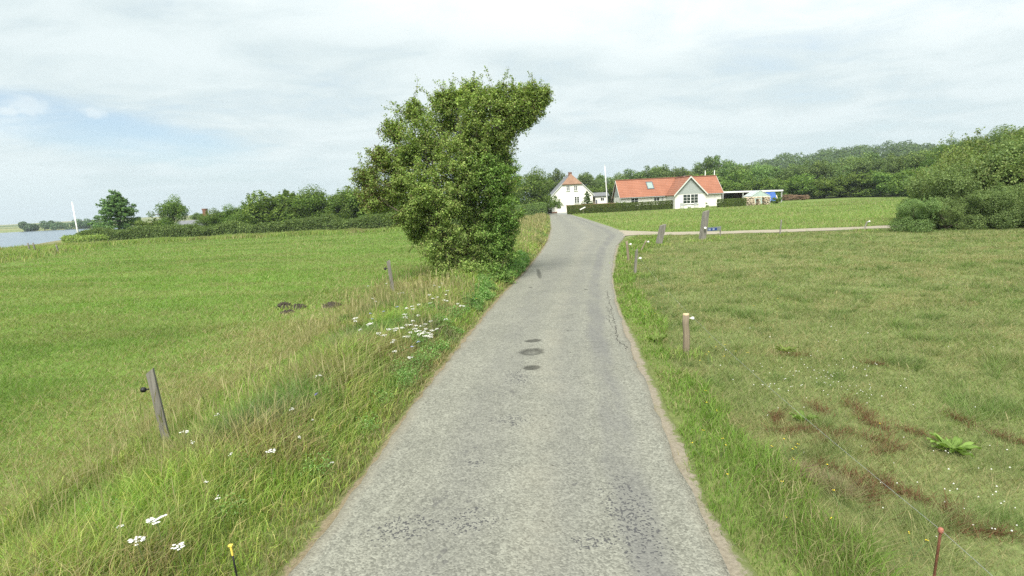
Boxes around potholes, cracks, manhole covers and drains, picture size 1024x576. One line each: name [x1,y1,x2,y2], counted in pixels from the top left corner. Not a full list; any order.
pothole [517,348,546,356]
